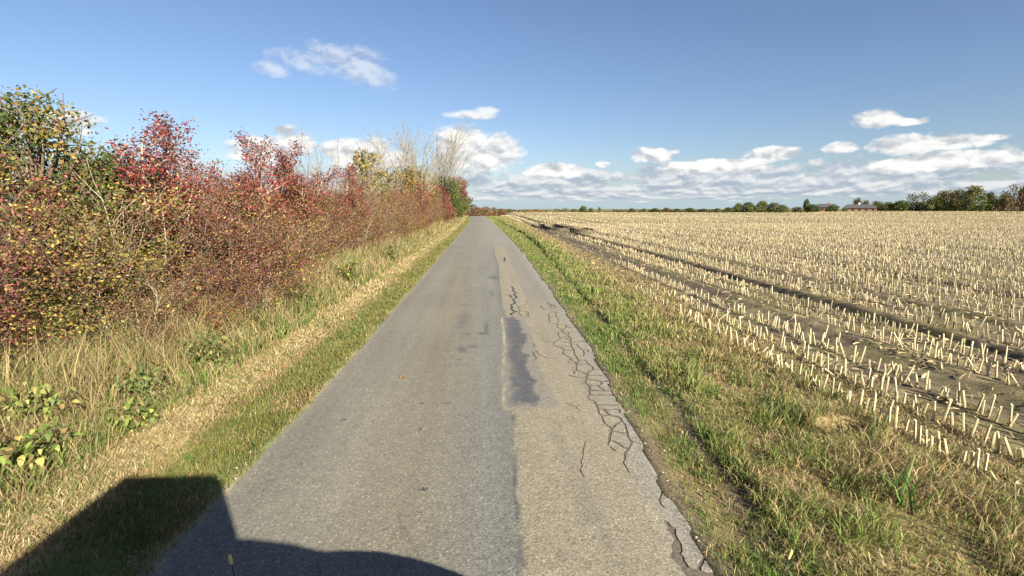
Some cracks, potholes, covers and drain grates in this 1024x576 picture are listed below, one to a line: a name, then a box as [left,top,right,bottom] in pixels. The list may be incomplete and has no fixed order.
crack [659,491,715,576]
crack [517,301,639,477]
